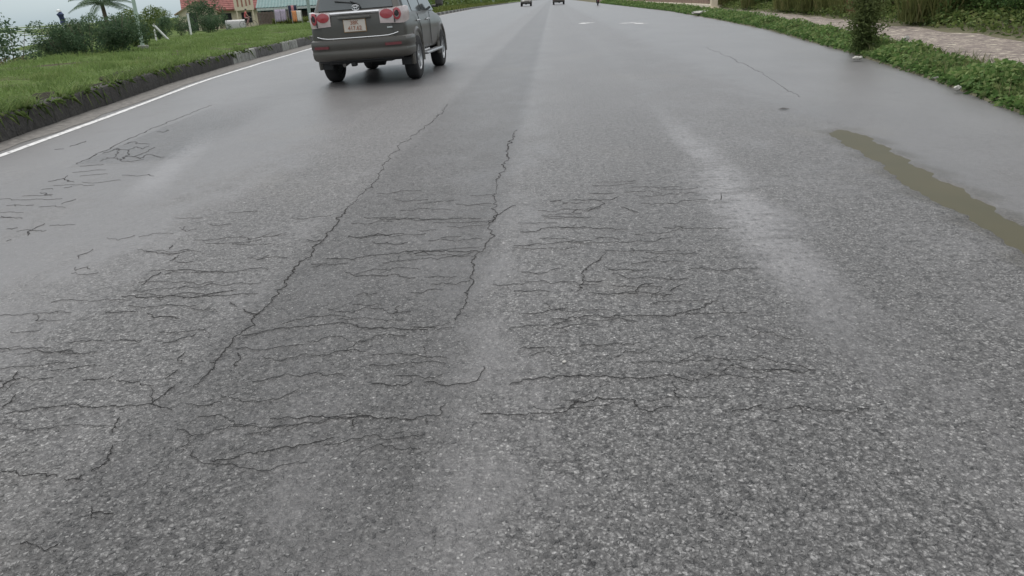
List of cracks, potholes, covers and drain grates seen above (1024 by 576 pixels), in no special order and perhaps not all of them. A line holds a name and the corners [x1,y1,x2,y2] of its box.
crack [481,183,868,415]
crack [0,104,517,481]
